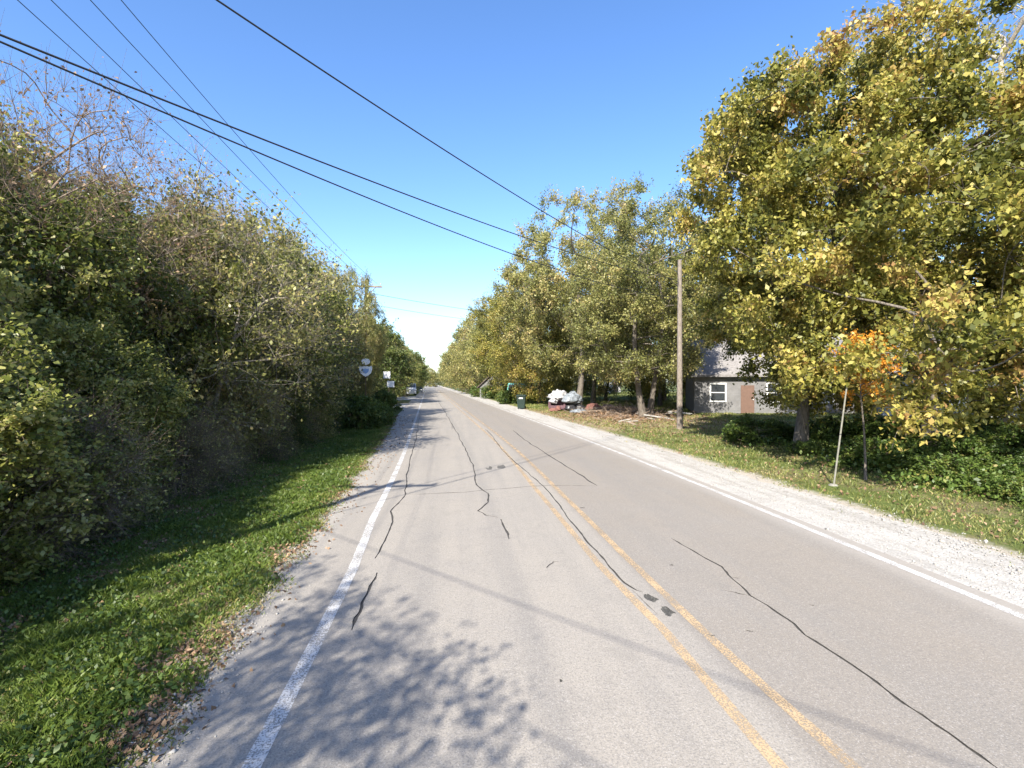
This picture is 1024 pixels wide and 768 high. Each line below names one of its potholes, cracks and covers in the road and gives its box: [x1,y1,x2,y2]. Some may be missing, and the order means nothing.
crack [671,539,997,768]
crack [351,401,657,630]
